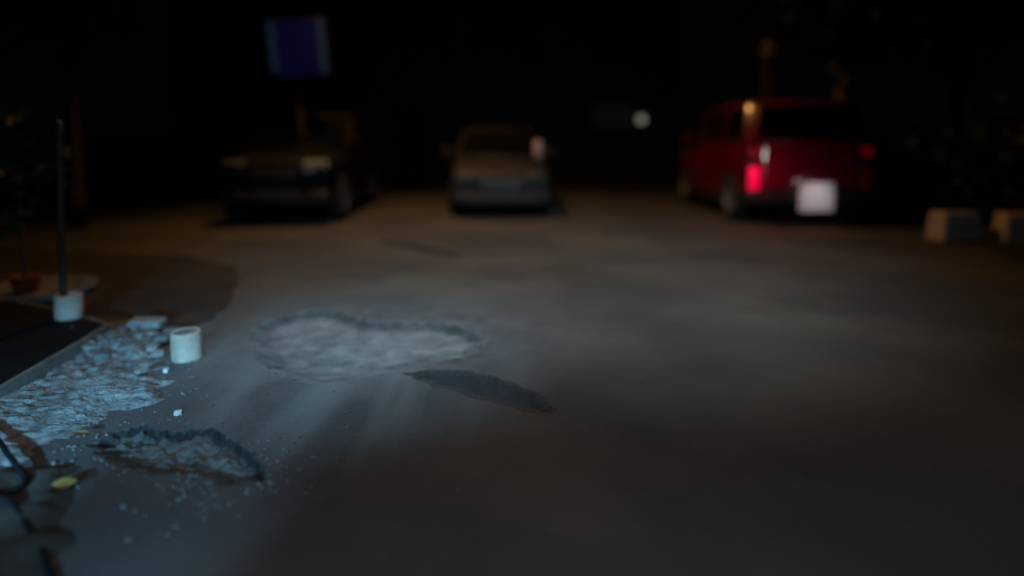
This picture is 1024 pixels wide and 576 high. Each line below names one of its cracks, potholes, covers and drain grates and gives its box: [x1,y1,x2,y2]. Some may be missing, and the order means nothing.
pothole [402,369,558,417]
pothole [84,423,267,487]
